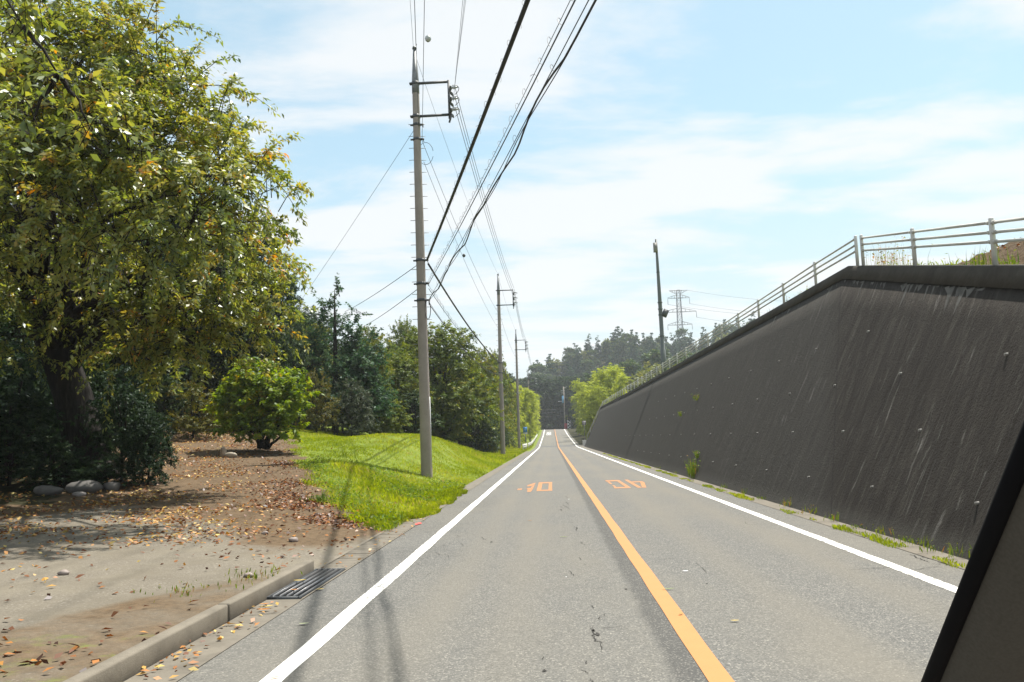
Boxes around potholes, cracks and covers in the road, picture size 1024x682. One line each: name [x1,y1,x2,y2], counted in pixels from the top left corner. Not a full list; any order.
drain grate [267,567,345,601]
